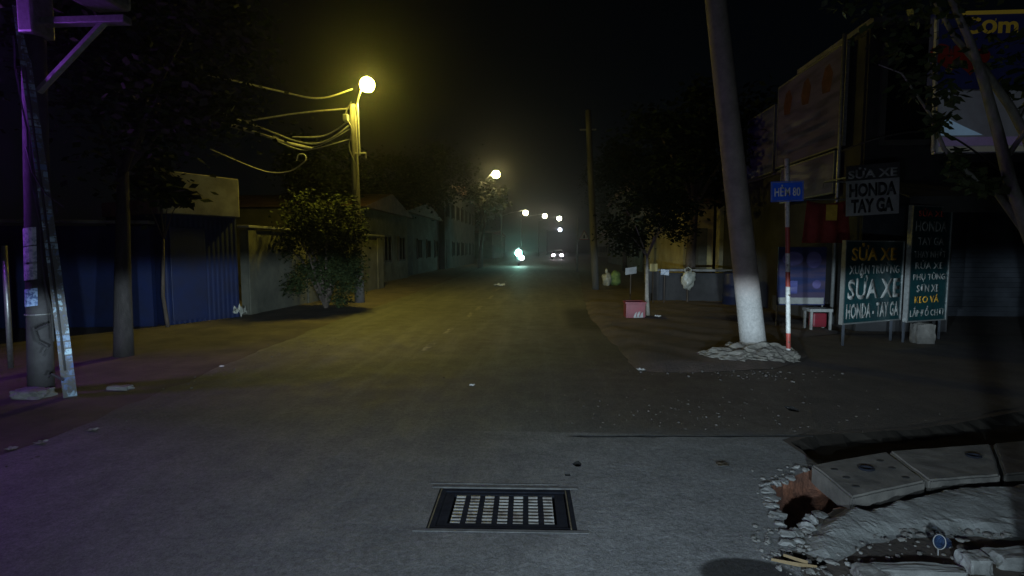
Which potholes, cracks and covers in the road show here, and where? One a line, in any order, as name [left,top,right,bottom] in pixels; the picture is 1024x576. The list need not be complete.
pothole [751,464,847,555]
drain grate [412,483,589,534]
